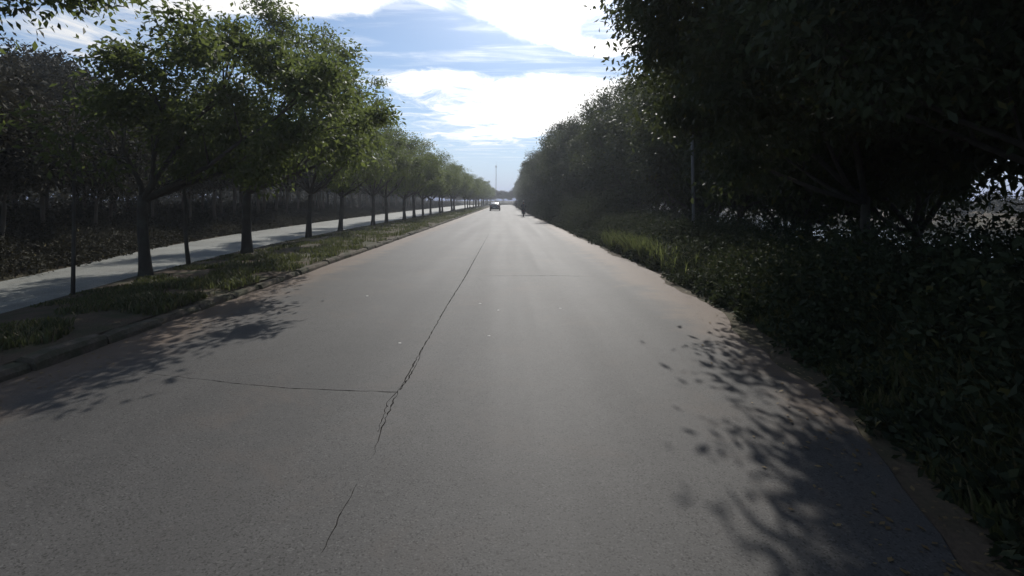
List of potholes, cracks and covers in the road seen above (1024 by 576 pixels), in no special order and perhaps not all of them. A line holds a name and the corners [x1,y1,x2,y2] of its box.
crack [144,241,485,456]
crack [322,484,357,552]
